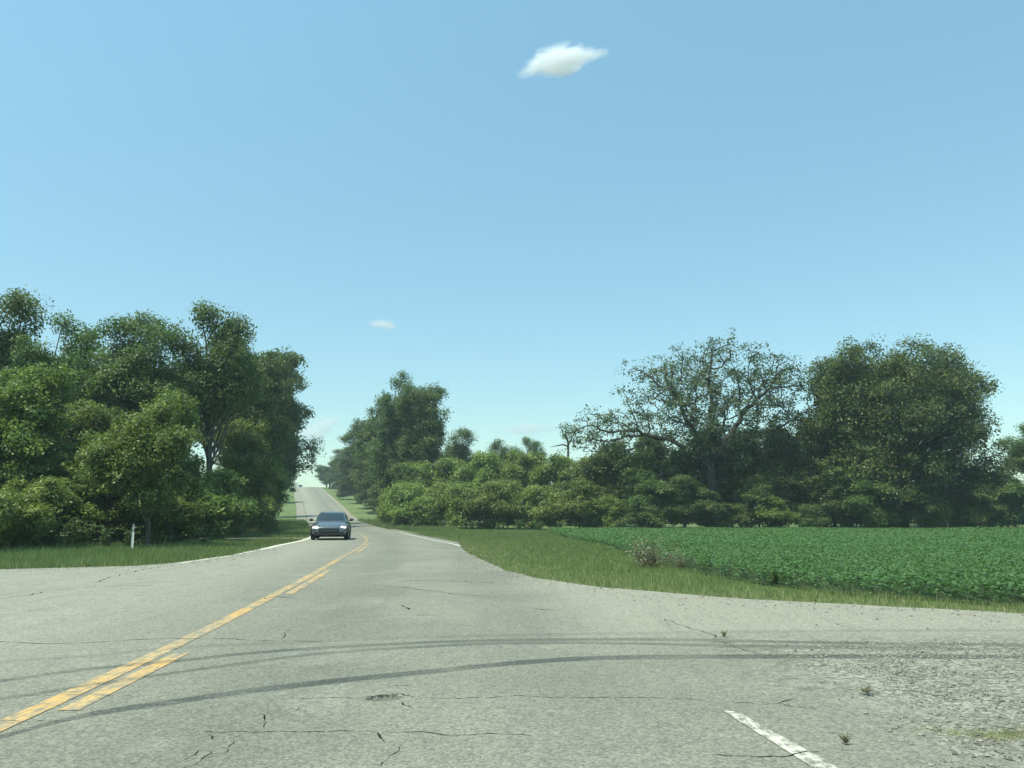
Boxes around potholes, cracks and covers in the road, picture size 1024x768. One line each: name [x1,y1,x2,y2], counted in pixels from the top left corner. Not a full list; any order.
pothole [364,694,403,702]
crack [0,626,324,644]
crack [3,568,153,599]
crack [714,751,819,762]
crack [182,713,531,768]
crack [293,685,709,712]
